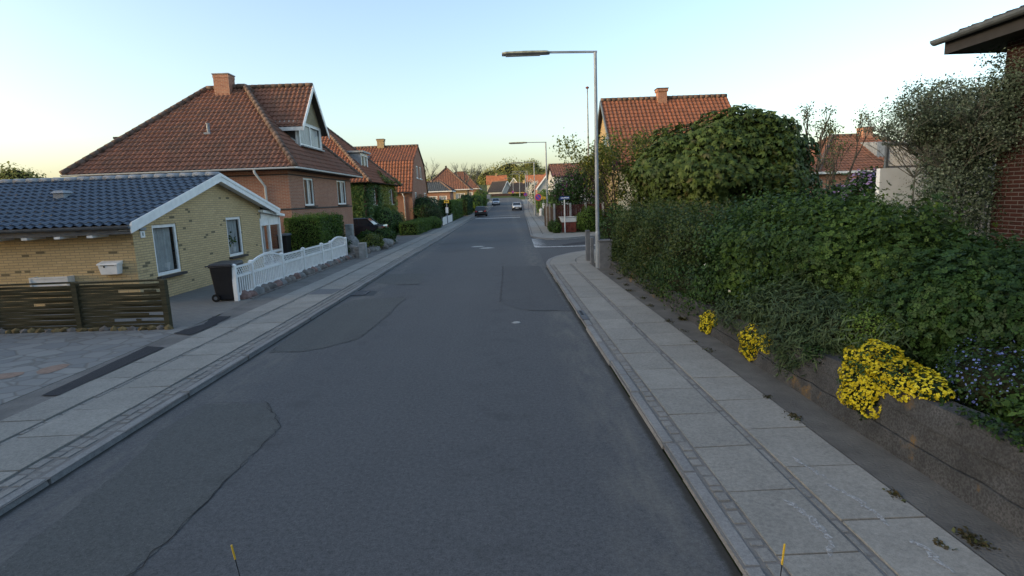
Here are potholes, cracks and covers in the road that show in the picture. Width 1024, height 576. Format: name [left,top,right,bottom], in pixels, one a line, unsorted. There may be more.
crack [126,401,281,576]
